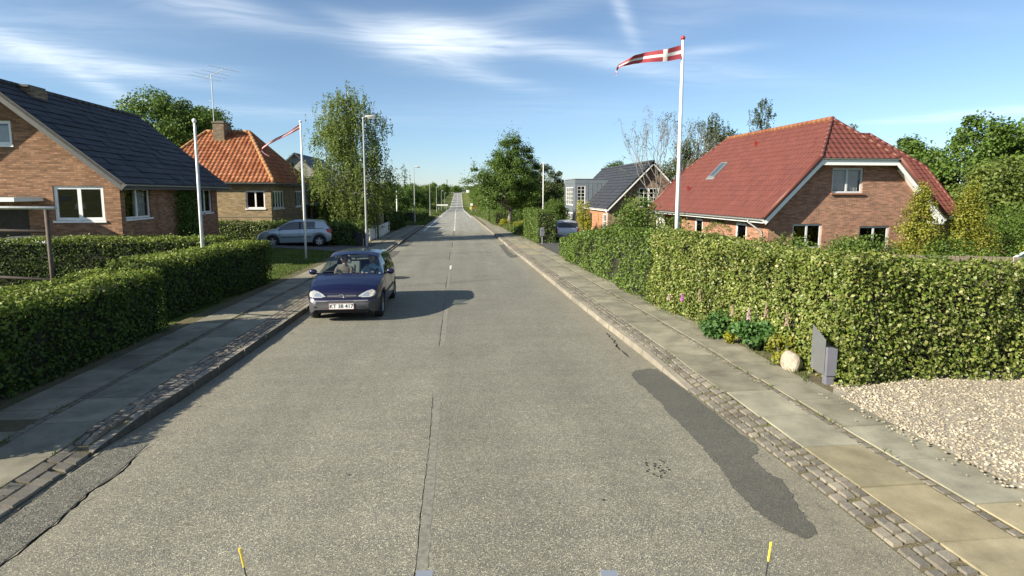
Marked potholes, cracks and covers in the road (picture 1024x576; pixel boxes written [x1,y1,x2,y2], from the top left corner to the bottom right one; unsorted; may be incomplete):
crack [0,445,154,567]
